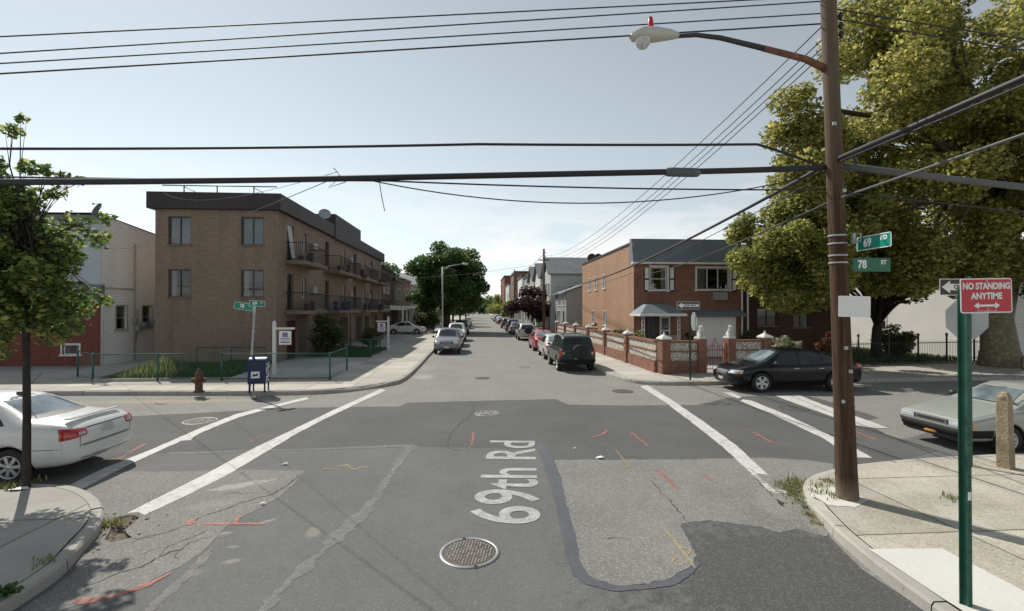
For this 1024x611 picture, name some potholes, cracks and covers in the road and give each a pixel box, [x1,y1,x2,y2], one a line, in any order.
manhole cover [439,537,500,569]
crack [88,474,301,586]
pothole [105,515,139,542]
manhole cover [182,417,218,425]
